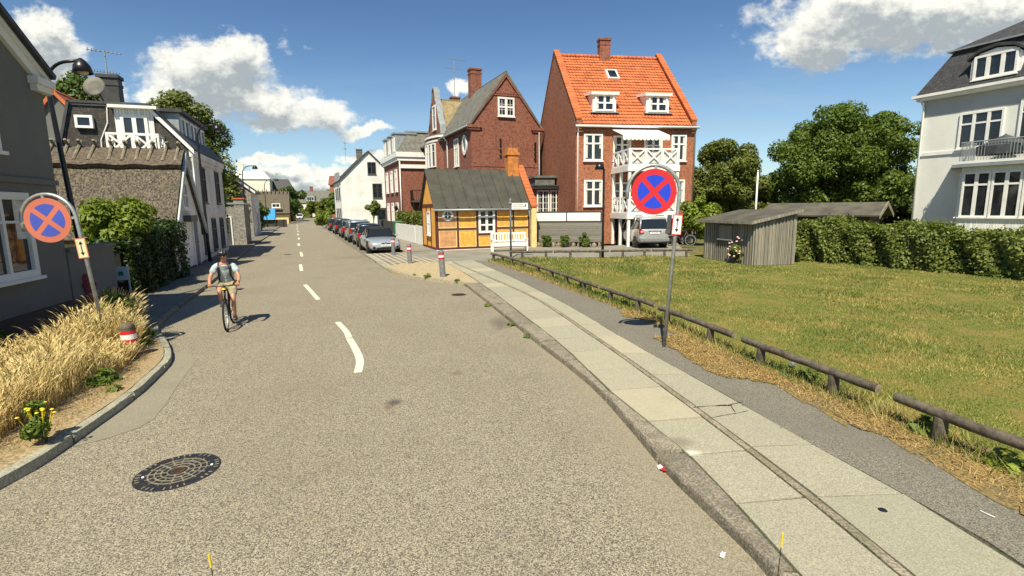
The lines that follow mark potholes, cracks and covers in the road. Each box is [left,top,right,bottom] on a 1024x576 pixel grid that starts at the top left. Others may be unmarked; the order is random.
manhole cover [132,453,221,492]
